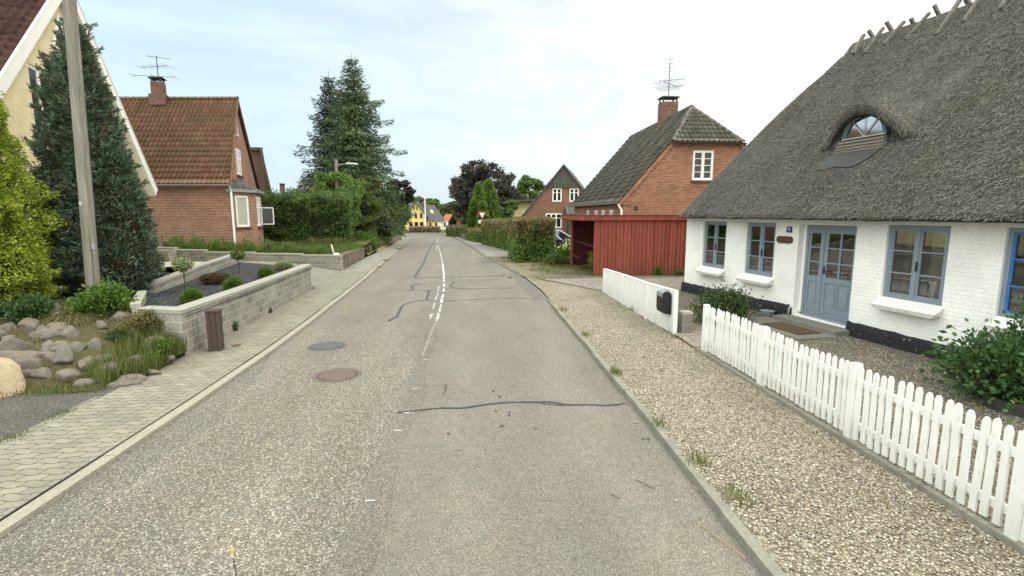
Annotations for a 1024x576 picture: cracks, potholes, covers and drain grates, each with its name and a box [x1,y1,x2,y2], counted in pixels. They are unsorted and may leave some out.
manhole cover [307,341,347,351]
manhole cover [312,368,363,383]
